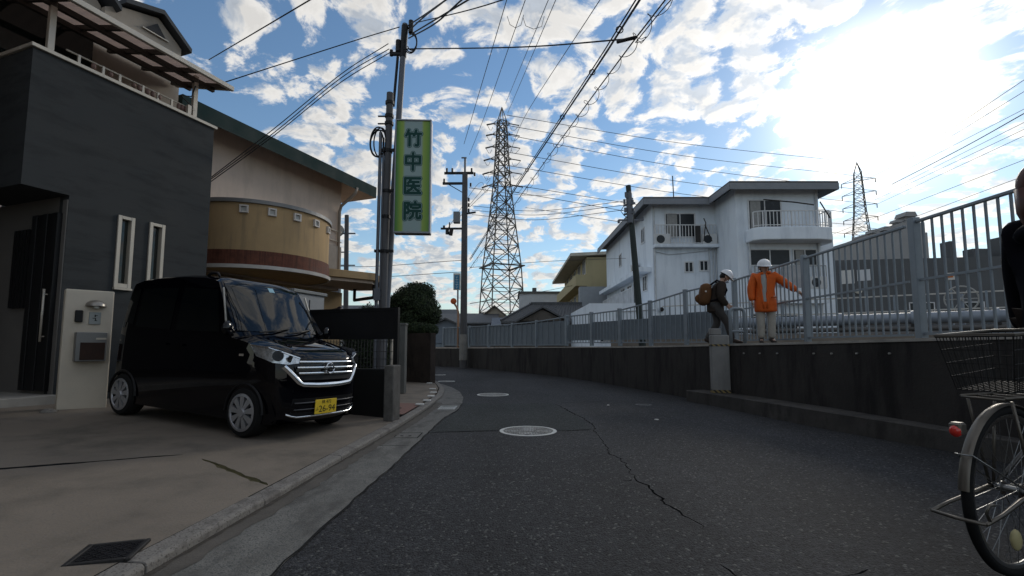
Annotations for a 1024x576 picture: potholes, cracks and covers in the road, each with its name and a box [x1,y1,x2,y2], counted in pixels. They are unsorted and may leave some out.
crack [558,405,704,528]
manhole cover [500,426,557,436]
